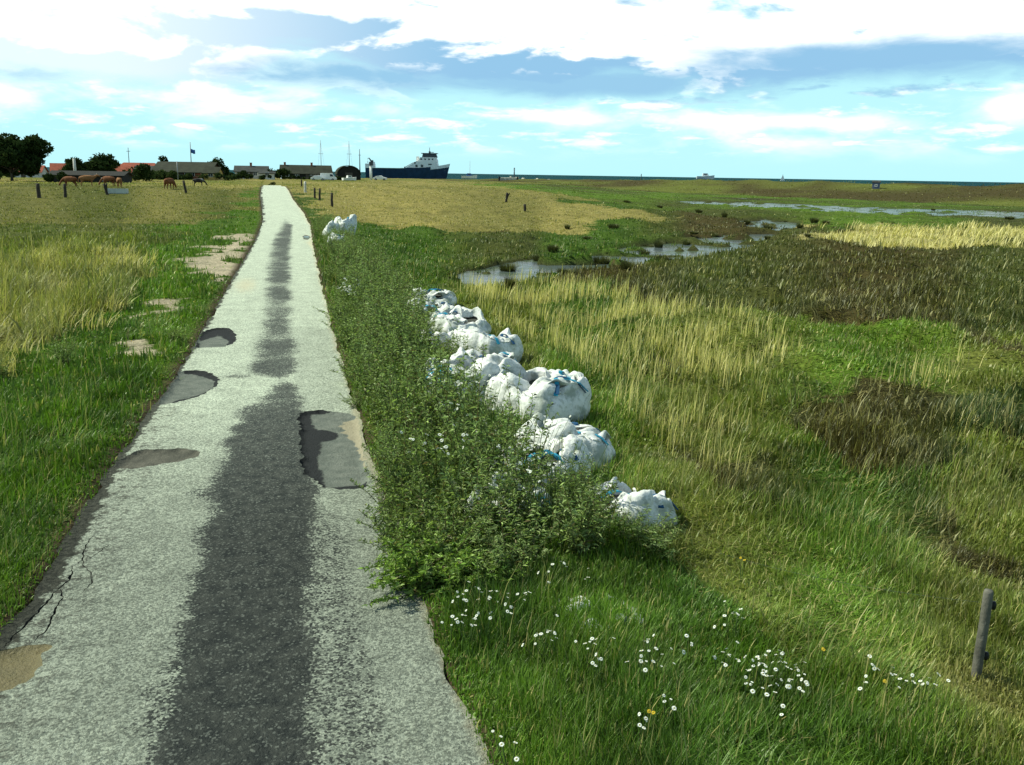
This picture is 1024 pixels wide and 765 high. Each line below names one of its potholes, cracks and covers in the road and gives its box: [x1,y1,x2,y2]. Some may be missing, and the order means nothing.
crack [4,536,109,647]
